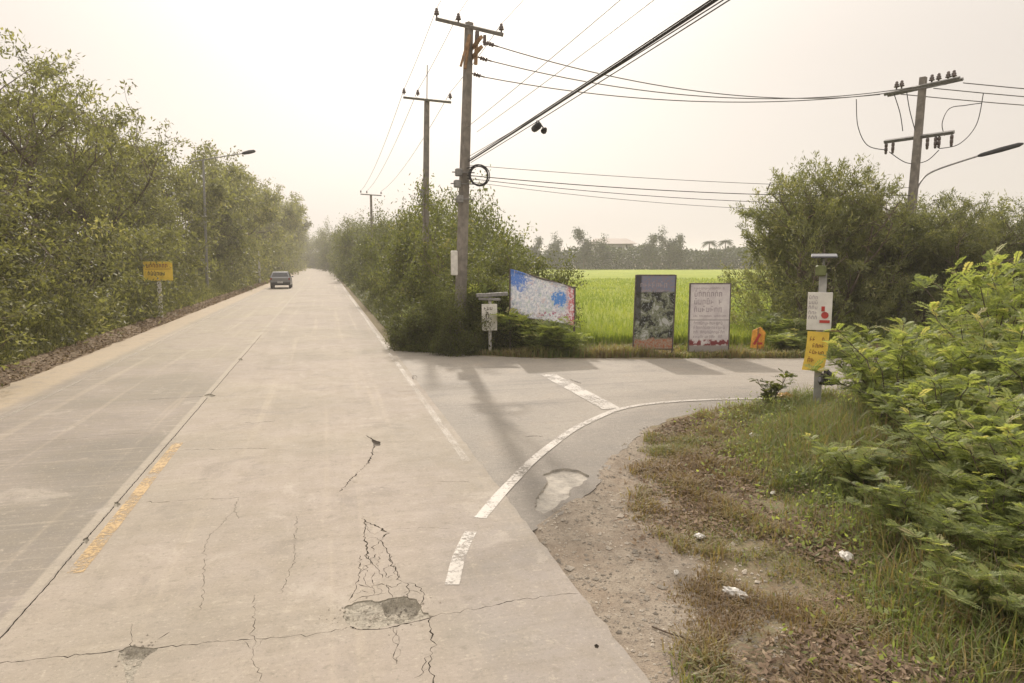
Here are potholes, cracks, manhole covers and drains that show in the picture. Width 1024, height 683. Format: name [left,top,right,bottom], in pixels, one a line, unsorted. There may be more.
crack [1,518,577,683]
pothole [343,596,432,630]
crack [340,436,375,491]
pothole [118,646,158,683]
crack [149,497,239,610]
pothole [534,468,589,513]
